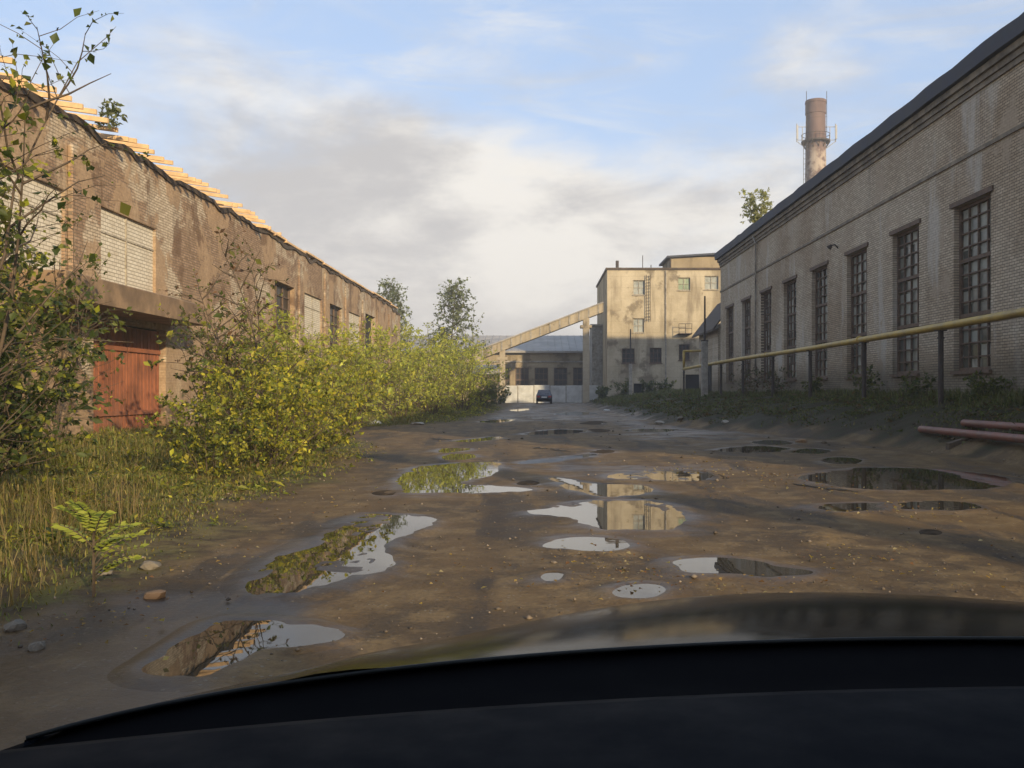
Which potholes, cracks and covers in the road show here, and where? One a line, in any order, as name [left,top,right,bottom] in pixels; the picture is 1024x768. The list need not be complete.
pothole [516,535,652,557]
pothole [784,467,1024,493]
pothole [506,498,714,536]
pothole [427,453,491,462]
pothole [702,445,798,454]
pothole [789,501,902,516]
pothole [588,470,726,484]
pothole [107,613,366,692]
pothole [586,580,692,605]
pothole [644,555,837,585]
pothole [375,461,554,496]
pothole [220,511,454,606]
